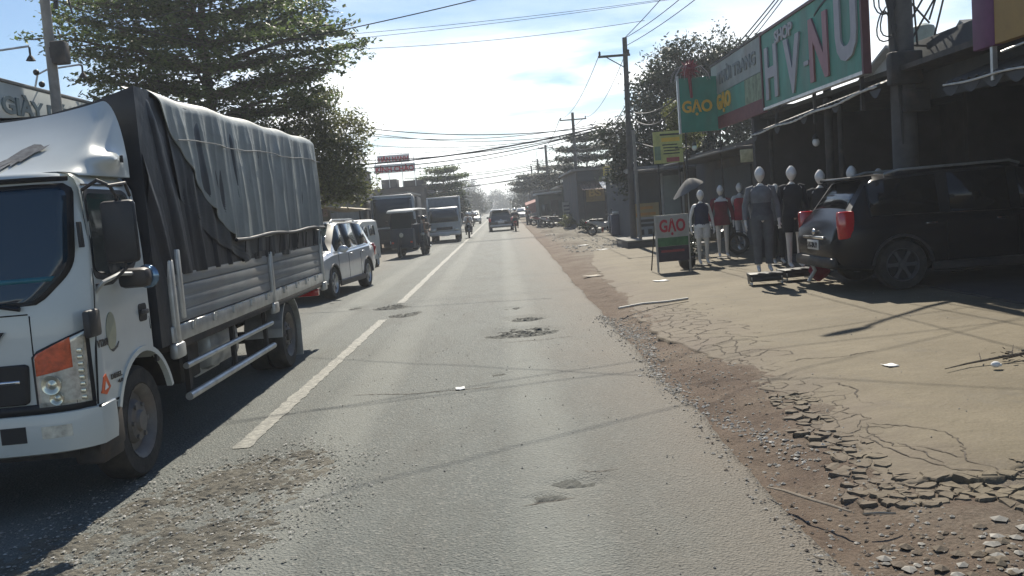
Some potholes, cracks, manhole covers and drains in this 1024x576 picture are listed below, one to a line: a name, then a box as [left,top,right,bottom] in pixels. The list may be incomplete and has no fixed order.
crack [633,303,1022,475]
pothole [551,480,596,489]
pothole [485,327,559,339]
pothole [534,495,568,503]
